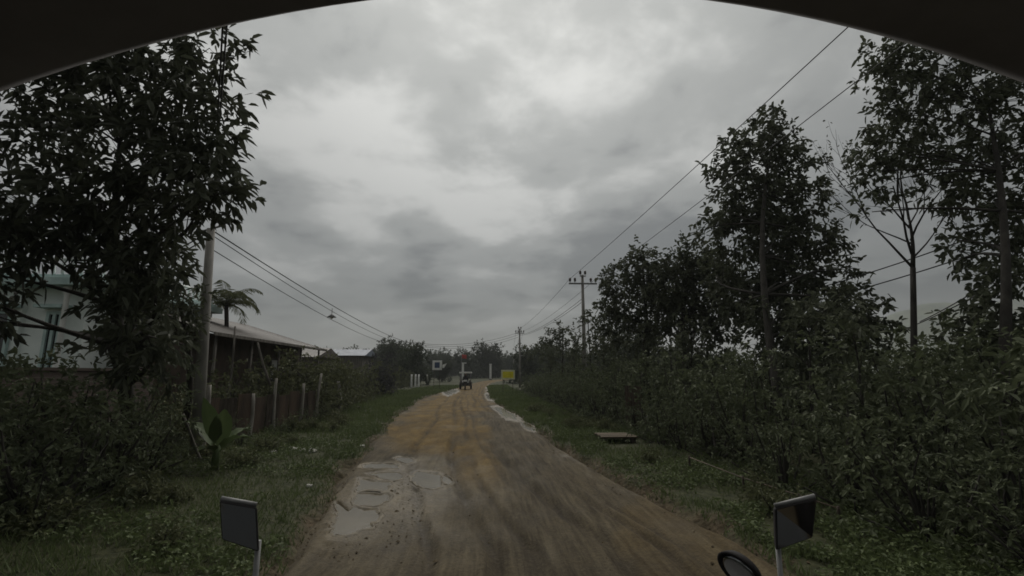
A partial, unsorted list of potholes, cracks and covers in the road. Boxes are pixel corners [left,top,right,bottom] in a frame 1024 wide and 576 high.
pothole [350,489,393,507]
pothole [408,470,446,490]
pothole [329,500,384,538]
pothole [492,406,521,421]
pothole [369,471,406,482]
